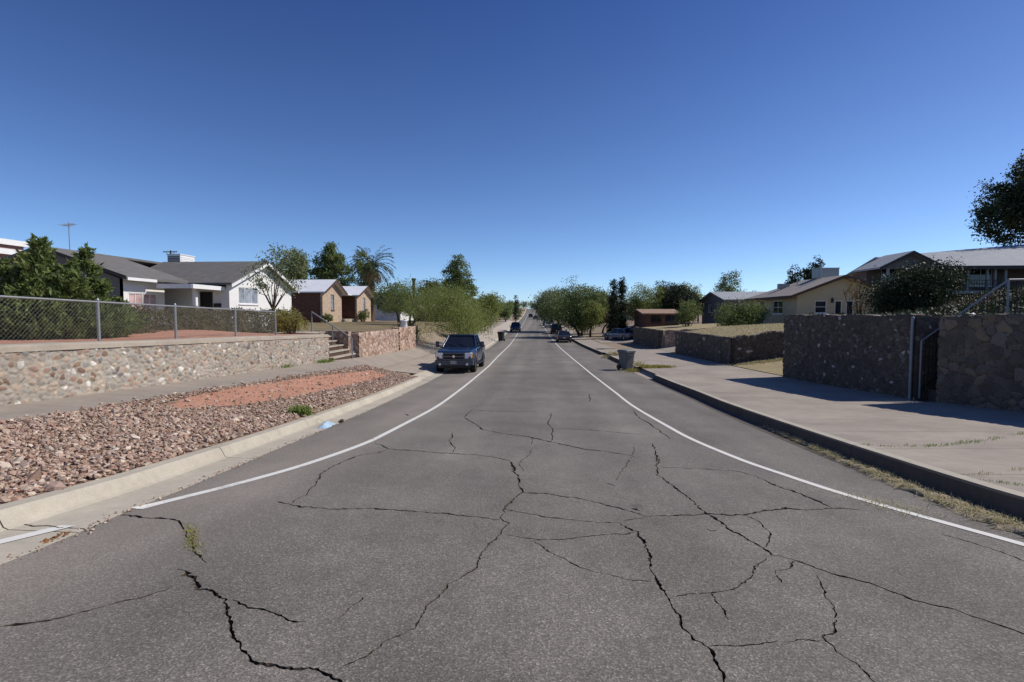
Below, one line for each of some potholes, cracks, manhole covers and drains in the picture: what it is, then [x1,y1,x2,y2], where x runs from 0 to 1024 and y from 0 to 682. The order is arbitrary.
crack [0,434,1024,682]
crack [633,411,670,462]
crack [465,410,644,486]
